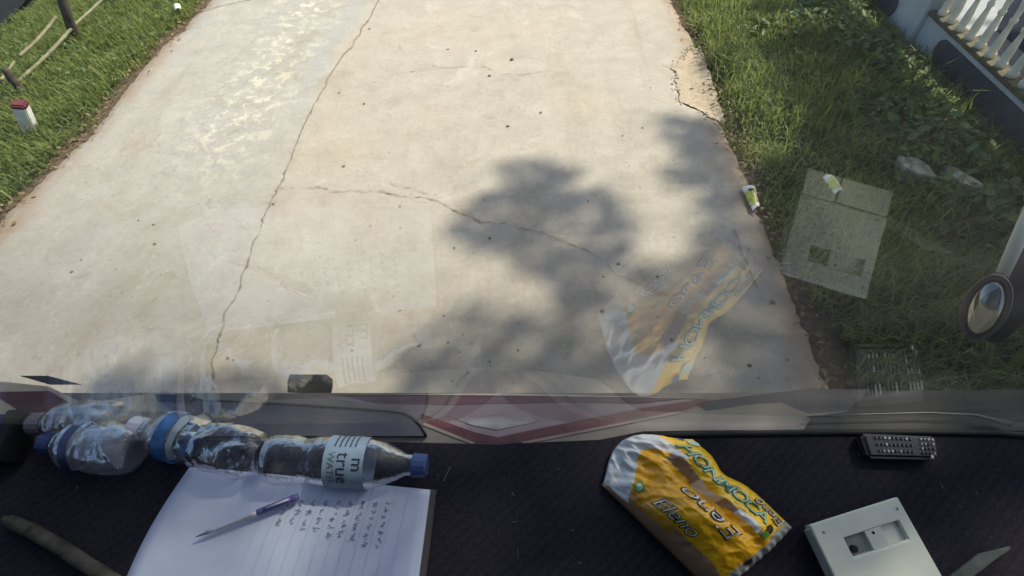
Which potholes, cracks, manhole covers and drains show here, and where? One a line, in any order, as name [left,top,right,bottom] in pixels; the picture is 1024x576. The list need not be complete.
crack [210,0,666,393]
